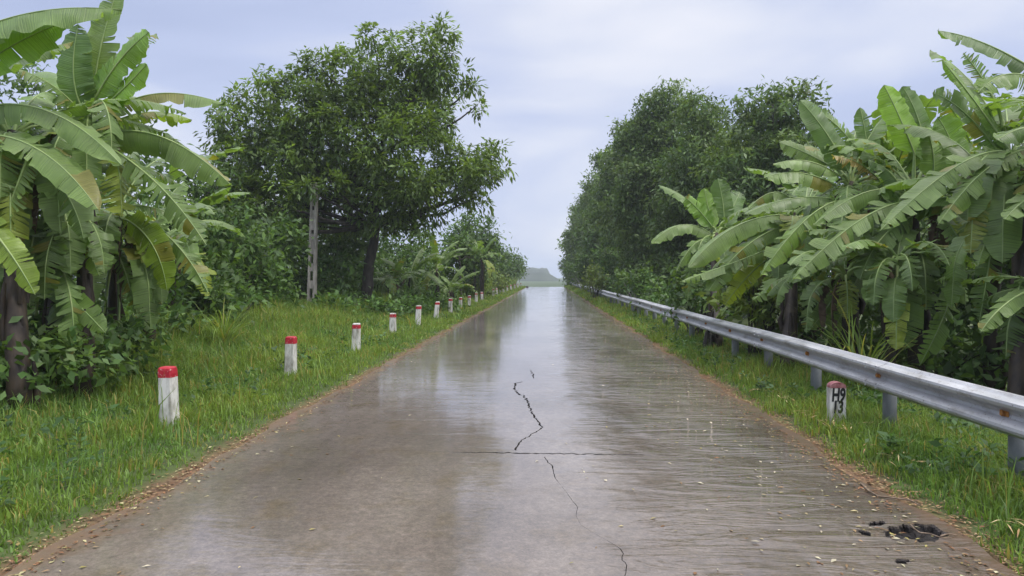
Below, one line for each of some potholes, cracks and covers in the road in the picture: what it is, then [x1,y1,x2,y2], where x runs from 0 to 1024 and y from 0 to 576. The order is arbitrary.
crack [462,372,636,576]
pothole [883,523,949,543]
